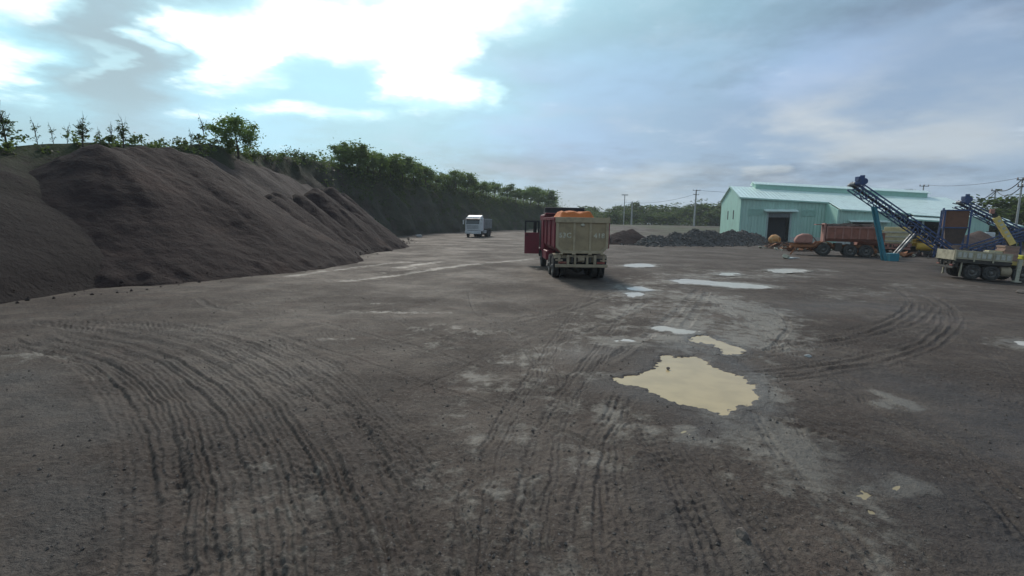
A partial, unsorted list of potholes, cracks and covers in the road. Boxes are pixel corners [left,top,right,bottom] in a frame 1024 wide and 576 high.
pothole [679,333,753,357]
pothole [603,351,772,420]
